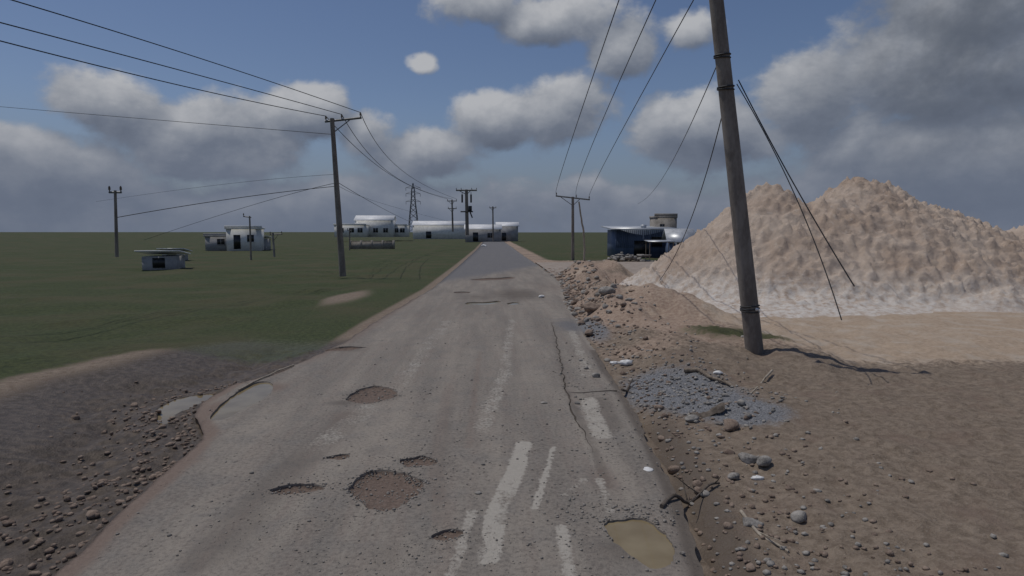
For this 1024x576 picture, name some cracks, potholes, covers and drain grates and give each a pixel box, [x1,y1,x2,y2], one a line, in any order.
pothole [344,466,429,514]
pothole [210,381,273,420]
pothole [342,384,403,404]
pothole [598,511,685,572]
pothole [429,527,467,541]
pothole [265,482,325,495]
pothole [397,454,438,467]
crack [551,324,617,446]
